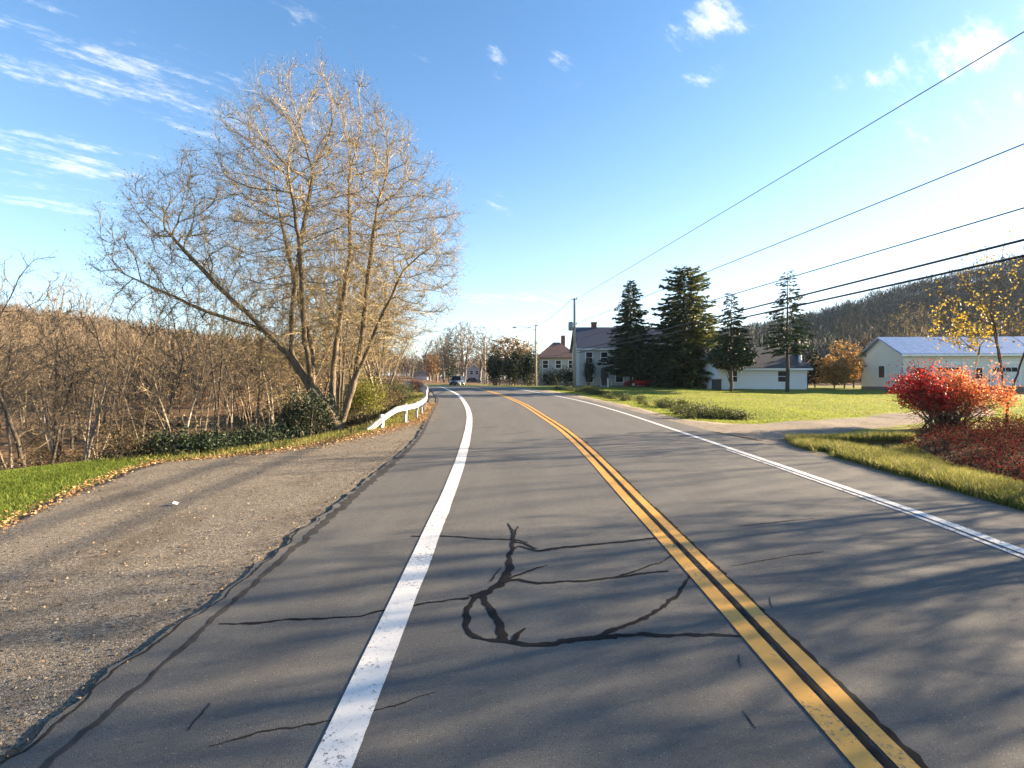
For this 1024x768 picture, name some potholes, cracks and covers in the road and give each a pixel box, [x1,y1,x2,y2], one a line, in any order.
crack [0,518,819,765]
